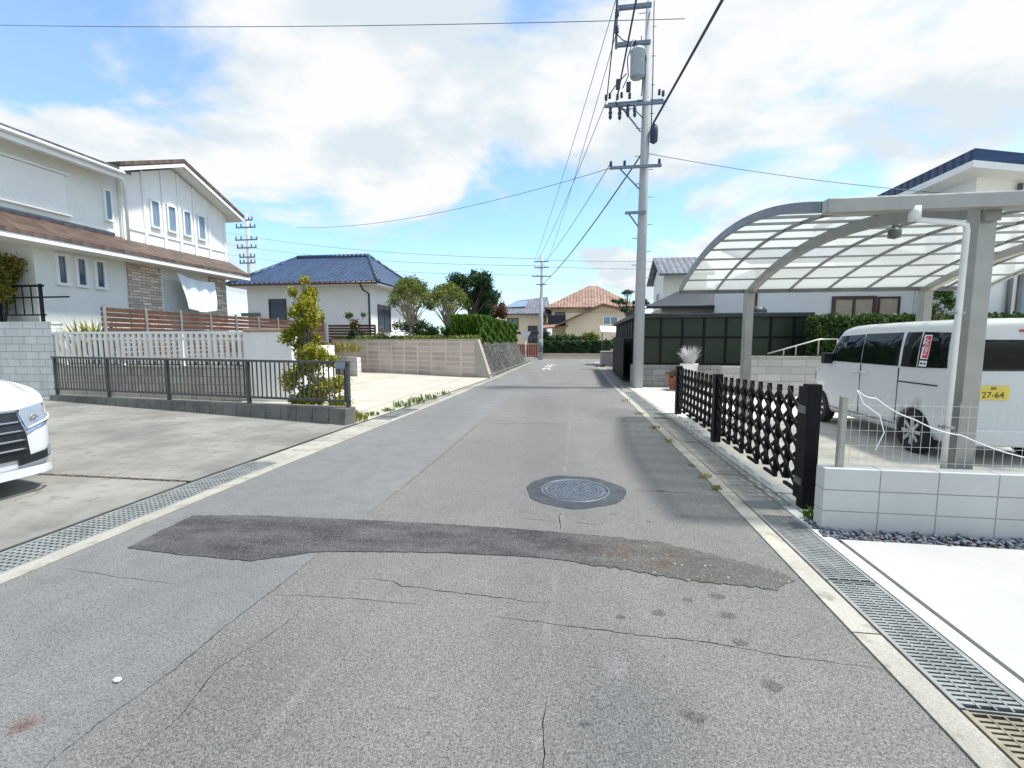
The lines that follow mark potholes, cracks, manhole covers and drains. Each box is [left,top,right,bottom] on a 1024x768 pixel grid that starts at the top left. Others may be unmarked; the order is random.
drain grate [758,515,876,584]
drain grate [0,526,111,574]
manhole cover [527,476,627,510]
drain grate [961,710,1024,768]
drain grate [74,487,213,529]
crack [131,579,886,763]
drain grate [827,580,1024,718]
drain grate [181,461,279,489]
